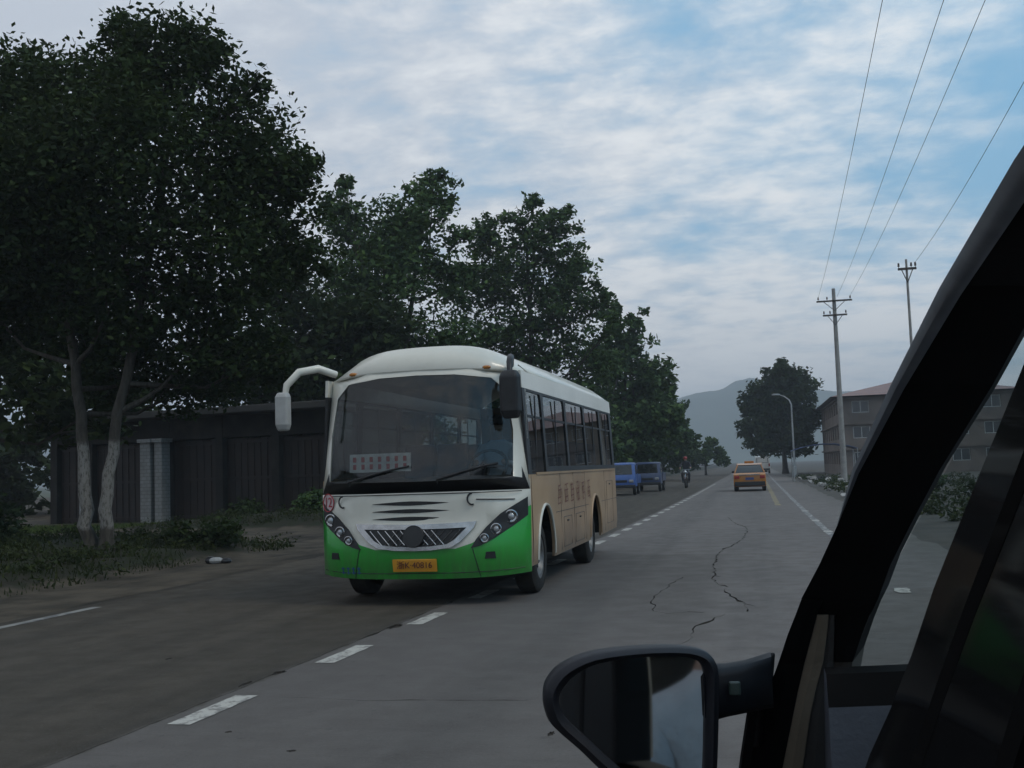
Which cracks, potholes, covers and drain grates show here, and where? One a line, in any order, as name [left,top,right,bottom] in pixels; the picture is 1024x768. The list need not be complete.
crack [650,518,753,643]
